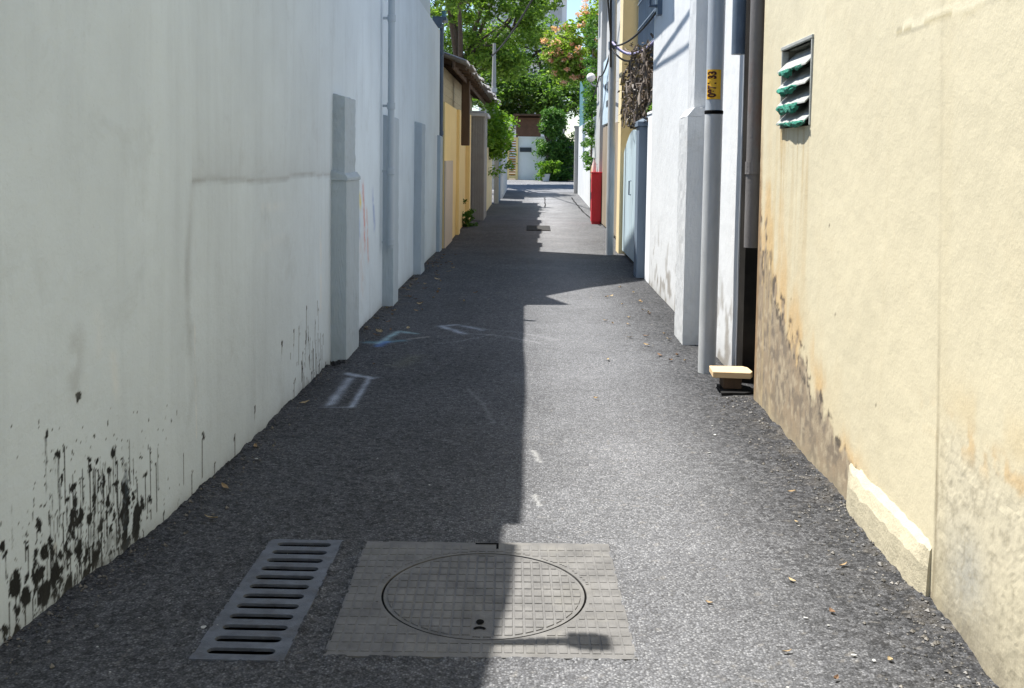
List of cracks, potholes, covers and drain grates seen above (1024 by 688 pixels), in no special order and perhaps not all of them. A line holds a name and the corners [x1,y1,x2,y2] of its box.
manhole cover [323,541,638,661]
drain grate [188,539,344,663]
